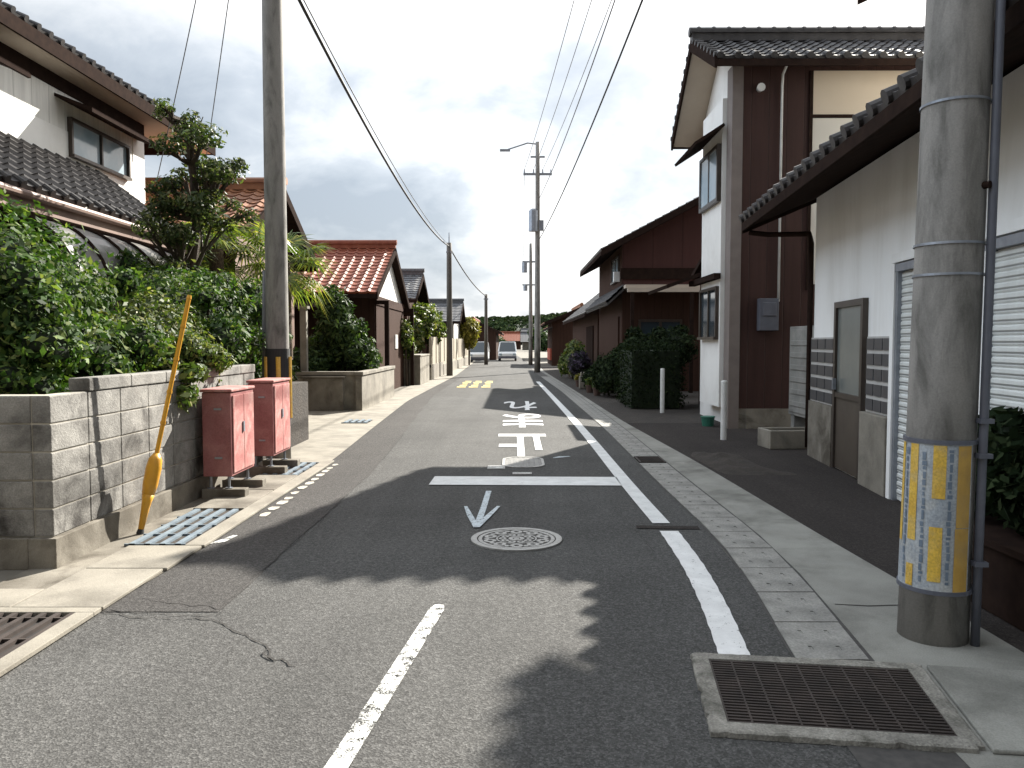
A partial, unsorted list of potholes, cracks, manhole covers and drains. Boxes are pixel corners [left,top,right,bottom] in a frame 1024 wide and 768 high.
drain grate [0,607,101,677]
manhole cover [471,527,562,552]
drain grate [690,653,985,754]
crack [102,597,366,665]
drain grate [124,509,239,546]
manhole cover [502,457,545,468]
